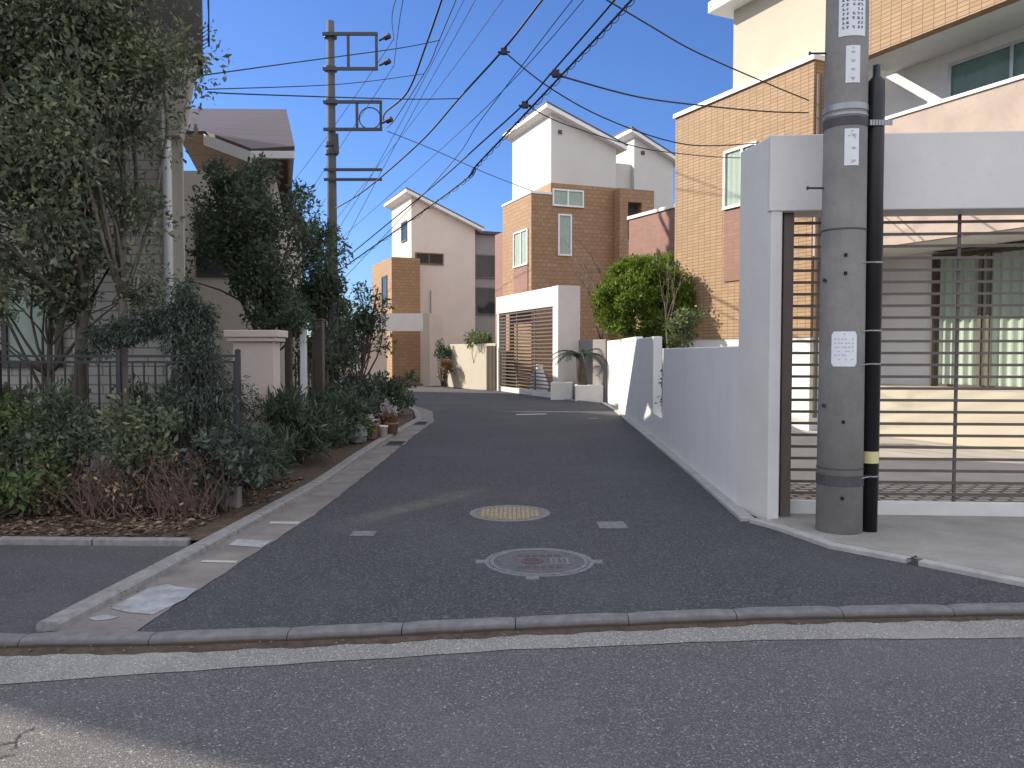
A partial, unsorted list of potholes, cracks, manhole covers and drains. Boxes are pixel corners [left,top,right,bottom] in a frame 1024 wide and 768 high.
manhole cover [475,548,603,580]
crack [0,726,37,757]
manhole cover [470,505,550,522]
